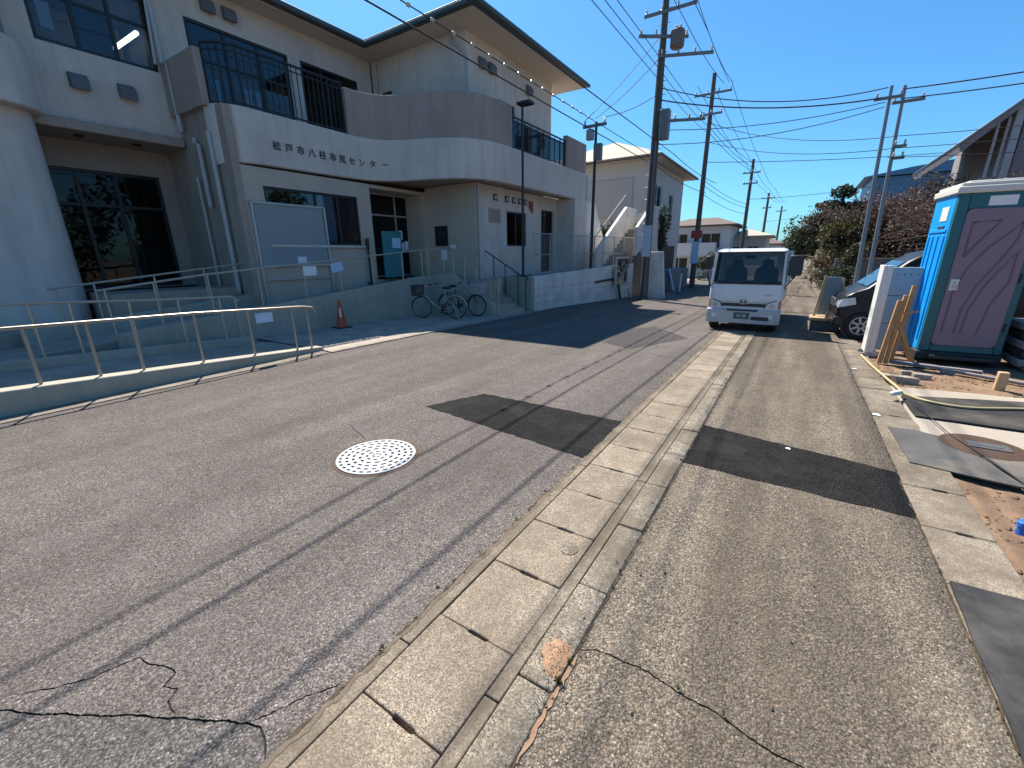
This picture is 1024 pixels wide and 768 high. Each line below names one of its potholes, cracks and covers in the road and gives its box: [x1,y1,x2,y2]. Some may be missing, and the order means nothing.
crack [581,649,804,768]
crack [0,657,342,760]
manhole cover [332,439,419,477]
manhole cover [938,433,1024,461]
